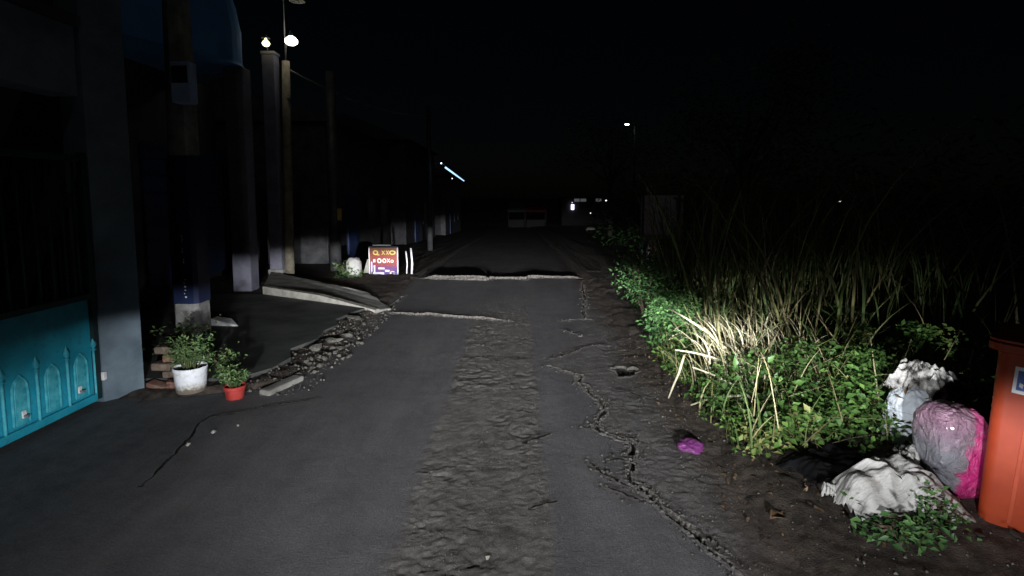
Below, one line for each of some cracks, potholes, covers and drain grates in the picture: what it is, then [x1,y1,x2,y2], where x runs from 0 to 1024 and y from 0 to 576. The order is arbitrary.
pothole [607,365,642,379]
crack [417,275,751,576]
crack [139,396,327,486]
